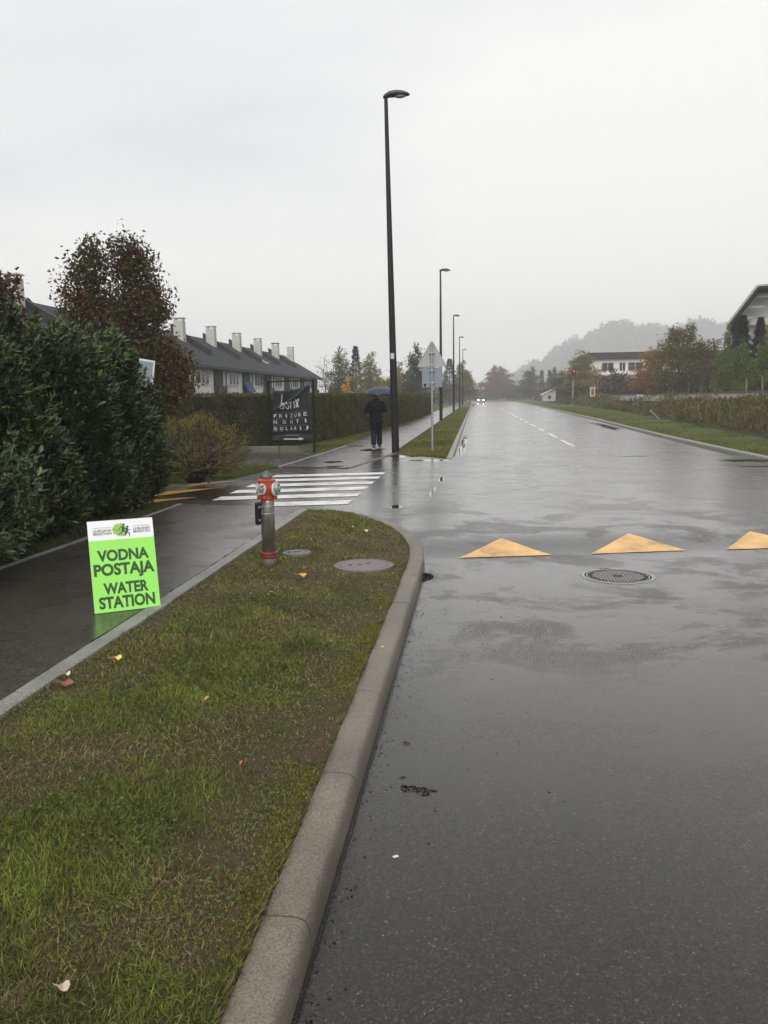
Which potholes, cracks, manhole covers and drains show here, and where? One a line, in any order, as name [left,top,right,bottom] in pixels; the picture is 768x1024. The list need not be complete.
manhole cover [581,568,656,584]
manhole cover [334,559,394,573]
manhole cover [282,549,311,557]
